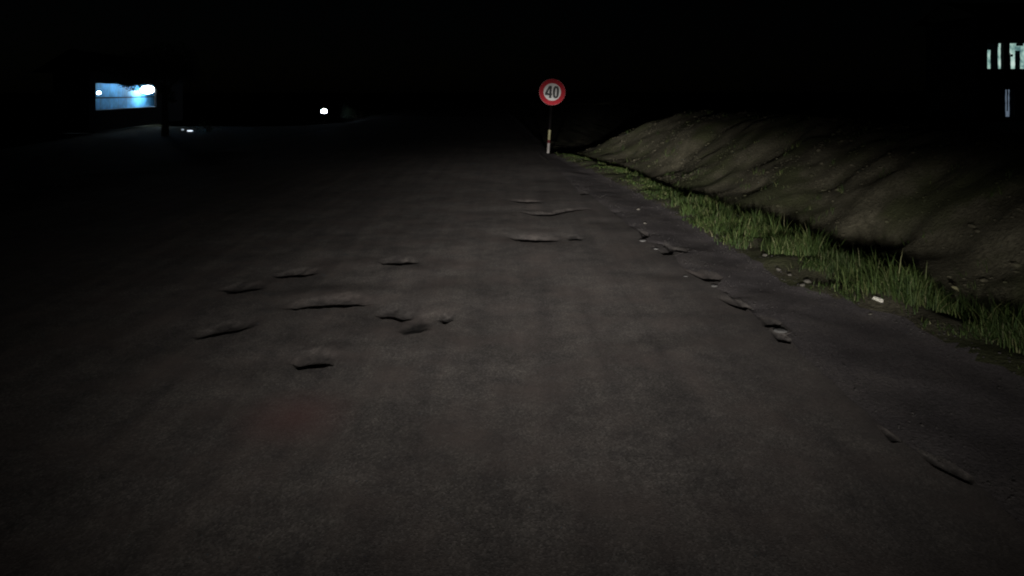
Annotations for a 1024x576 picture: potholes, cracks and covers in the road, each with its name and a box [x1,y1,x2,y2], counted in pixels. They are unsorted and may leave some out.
pothole [280,291,376,311]
pothole [516,206,593,216]
pothole [759,315,783,328]
pothole [289,341,340,370]
pothole [877,425,902,443]
pothole [769,328,792,344]
pothole [717,295,752,311]
pothole [215,280,270,294]
pothole [271,266,325,279]
pothole [374,255,423,266]
pothole [917,448,974,485]
pothole [505,235,562,243]
